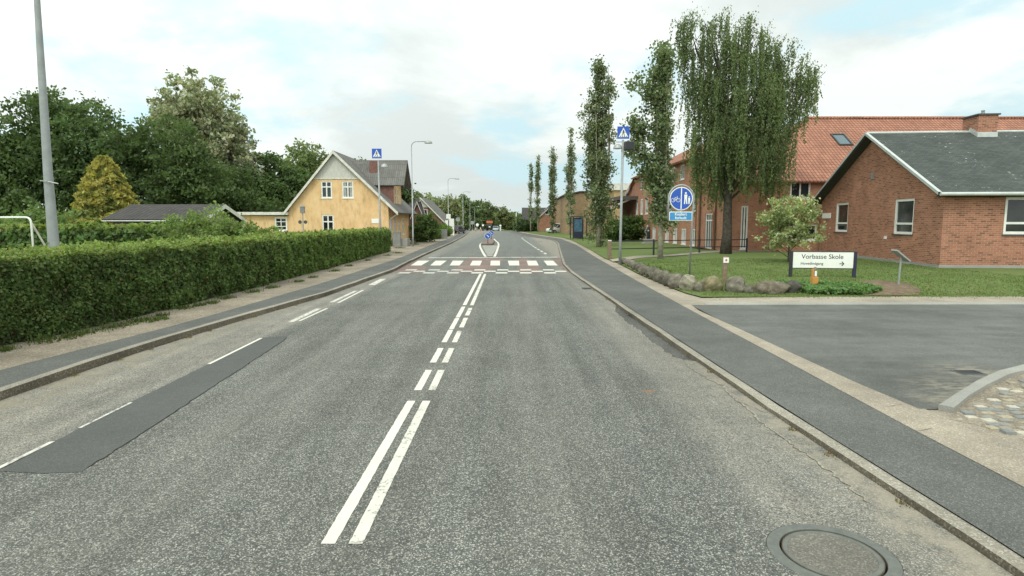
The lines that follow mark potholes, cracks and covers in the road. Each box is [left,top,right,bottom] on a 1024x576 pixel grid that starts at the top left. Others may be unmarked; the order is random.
manhole cover [766,524,904,576]
crack [685,362,868,502]
